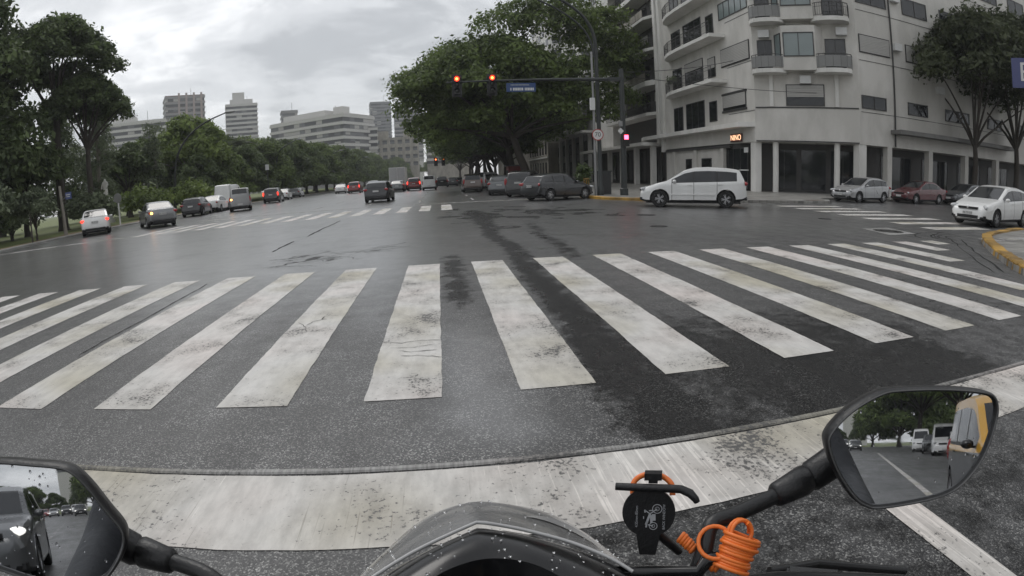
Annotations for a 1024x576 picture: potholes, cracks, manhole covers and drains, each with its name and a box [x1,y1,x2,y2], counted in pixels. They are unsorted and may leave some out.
crack [265,242,407,268]
crack [914,232,1003,272]
